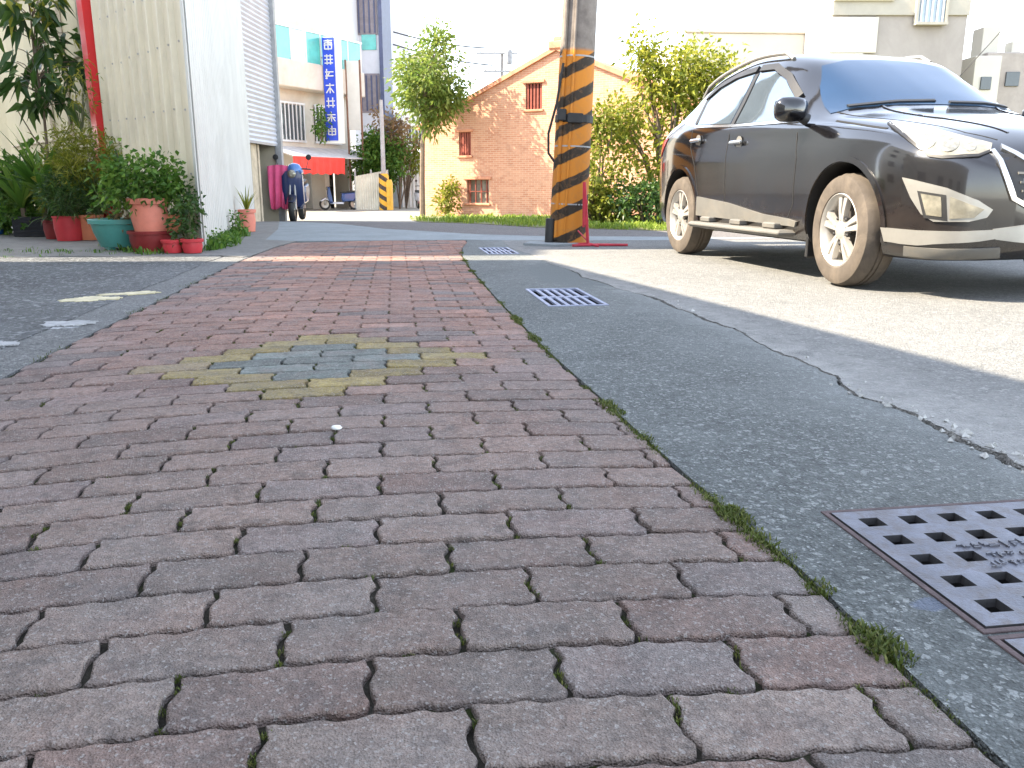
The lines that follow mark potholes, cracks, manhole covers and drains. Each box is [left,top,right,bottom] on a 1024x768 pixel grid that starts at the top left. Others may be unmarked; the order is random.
manhole cover [987,633,1024,665]
crack [653,295,1024,474]
drain grate [525,288,609,307]
